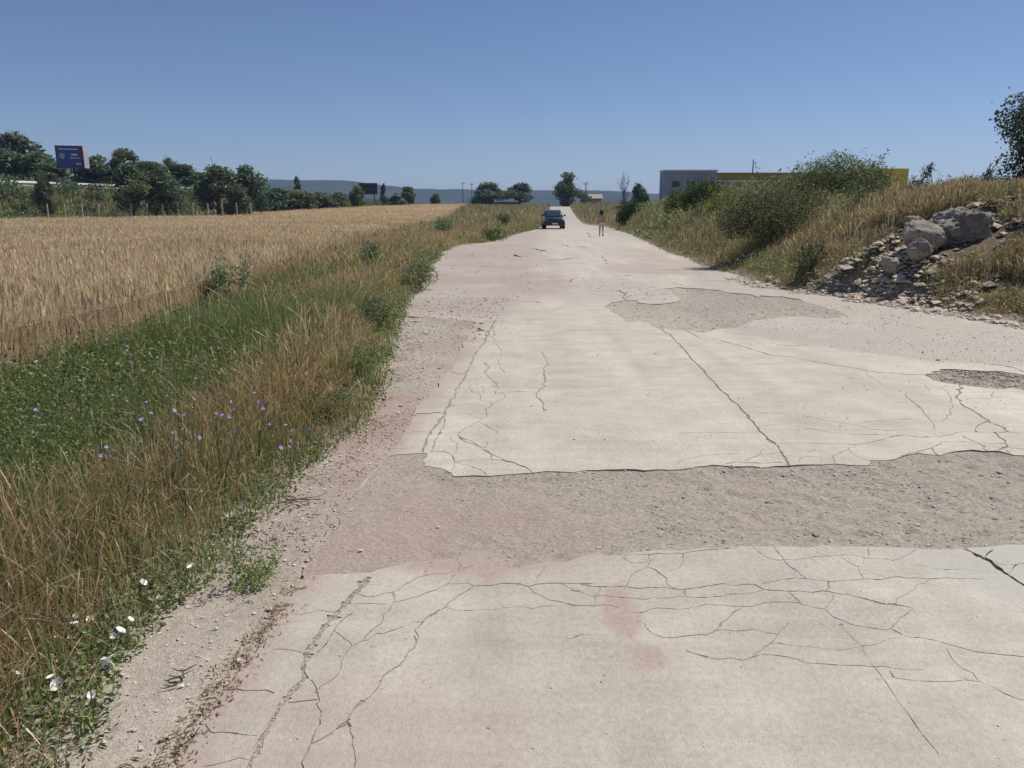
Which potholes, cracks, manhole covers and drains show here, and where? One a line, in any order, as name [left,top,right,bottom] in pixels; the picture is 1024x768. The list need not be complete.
crack [221,547,1024,768]
crack [513,232,674,301]
crack [767,385,1018,462]
pothole [302,450,1024,576]
crack [205,724,255,736]
crack [442,330,549,476]
pothole [606,287,845,333]
crack [687,331,925,387]
